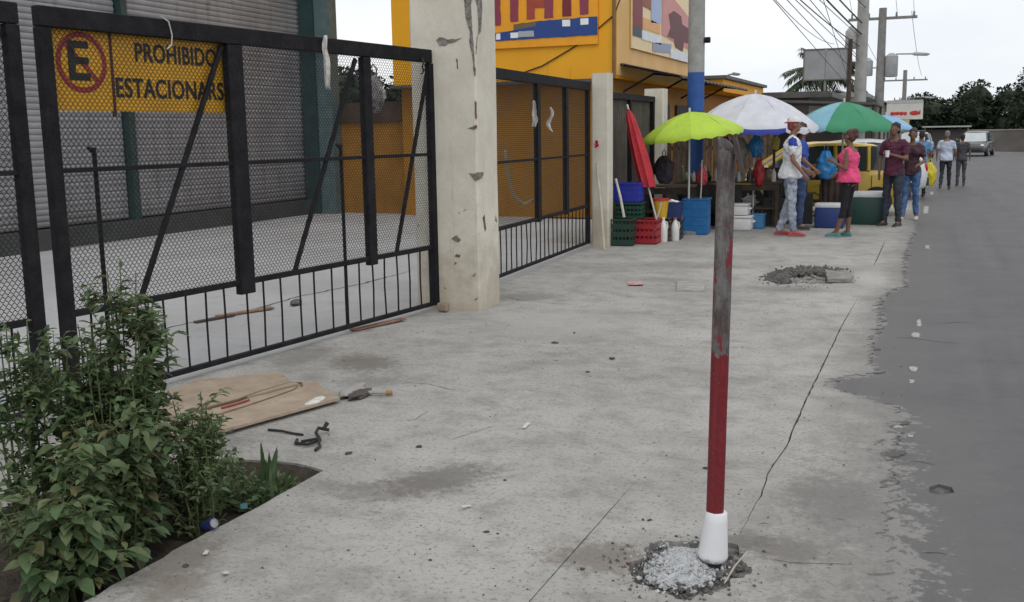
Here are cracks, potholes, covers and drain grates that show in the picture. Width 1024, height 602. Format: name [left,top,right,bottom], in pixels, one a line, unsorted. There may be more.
pothole [929,487,952,495]
